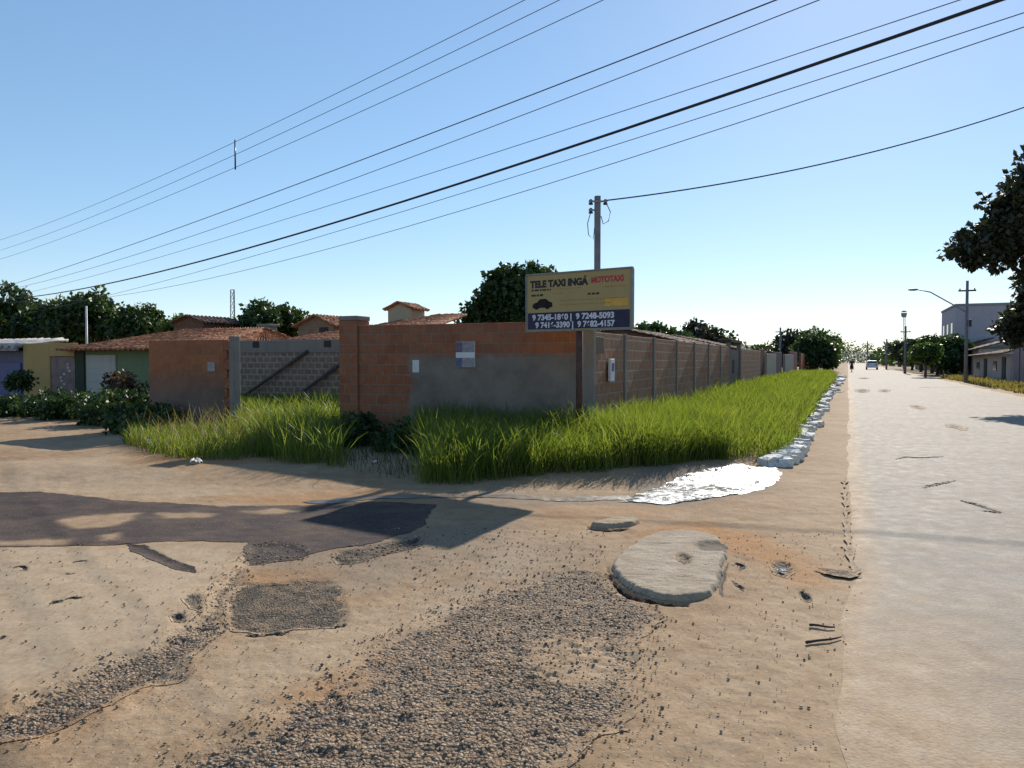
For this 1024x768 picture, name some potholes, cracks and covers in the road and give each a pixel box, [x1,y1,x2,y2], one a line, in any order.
crack [923,480,1002,514]
manhole cover [611,529,729,601]
pothole [768,560,796,578]
